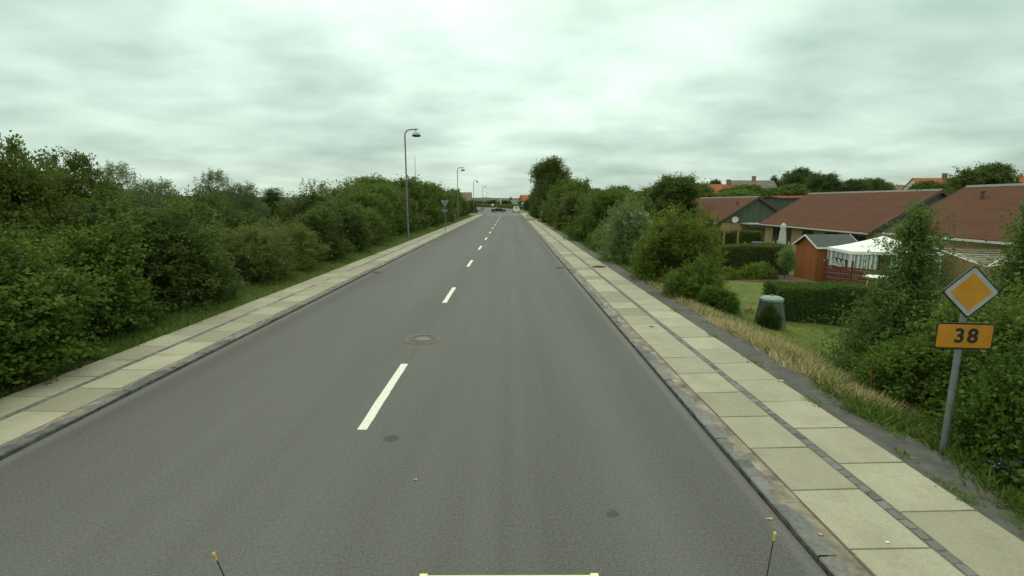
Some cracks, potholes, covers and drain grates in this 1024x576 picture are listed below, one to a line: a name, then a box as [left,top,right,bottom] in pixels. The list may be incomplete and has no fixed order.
manhole cover [402,334,443,345]
